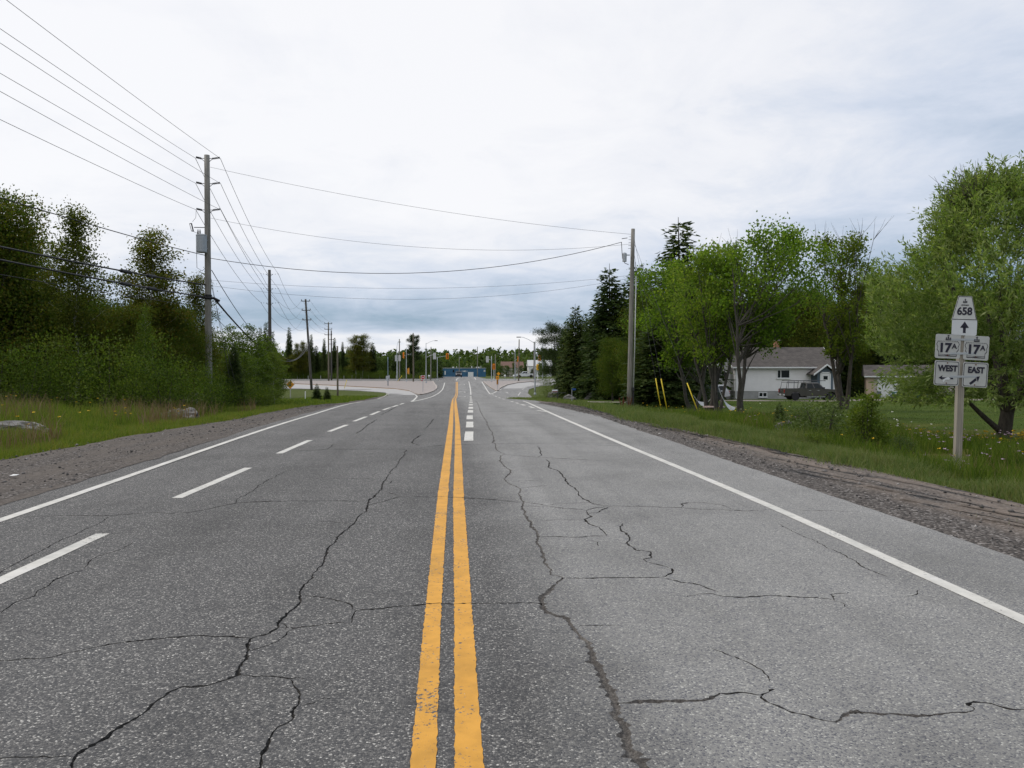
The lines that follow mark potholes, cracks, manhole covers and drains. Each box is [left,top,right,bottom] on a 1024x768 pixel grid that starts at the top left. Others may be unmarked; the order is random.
crack [0,401,1024,768]
